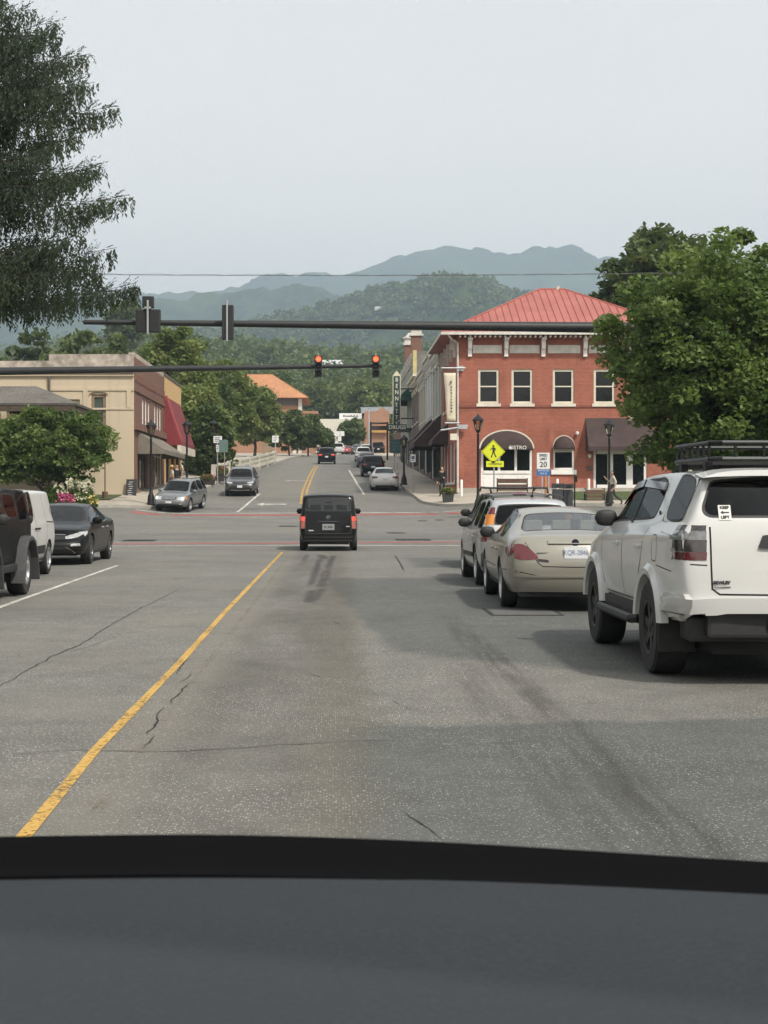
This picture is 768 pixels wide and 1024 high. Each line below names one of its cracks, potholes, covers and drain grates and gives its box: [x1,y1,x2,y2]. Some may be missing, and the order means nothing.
manhole cover [482,608,564,616]
crack [144,661,191,746]
crack [1,590,177,685]
